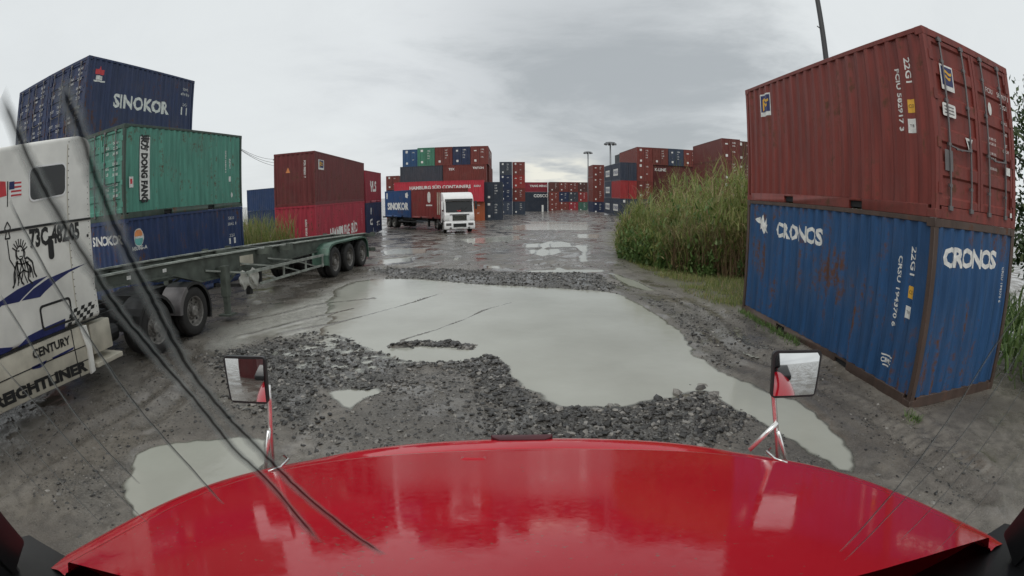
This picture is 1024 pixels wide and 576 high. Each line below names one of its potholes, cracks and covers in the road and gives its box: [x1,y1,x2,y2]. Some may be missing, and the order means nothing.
pothole [522,247,568,257]
pothole [102,426,289,528]
pothole [569,244,595,263]
pothole [520,240,578,248]
pothole [268,274,880,484]
